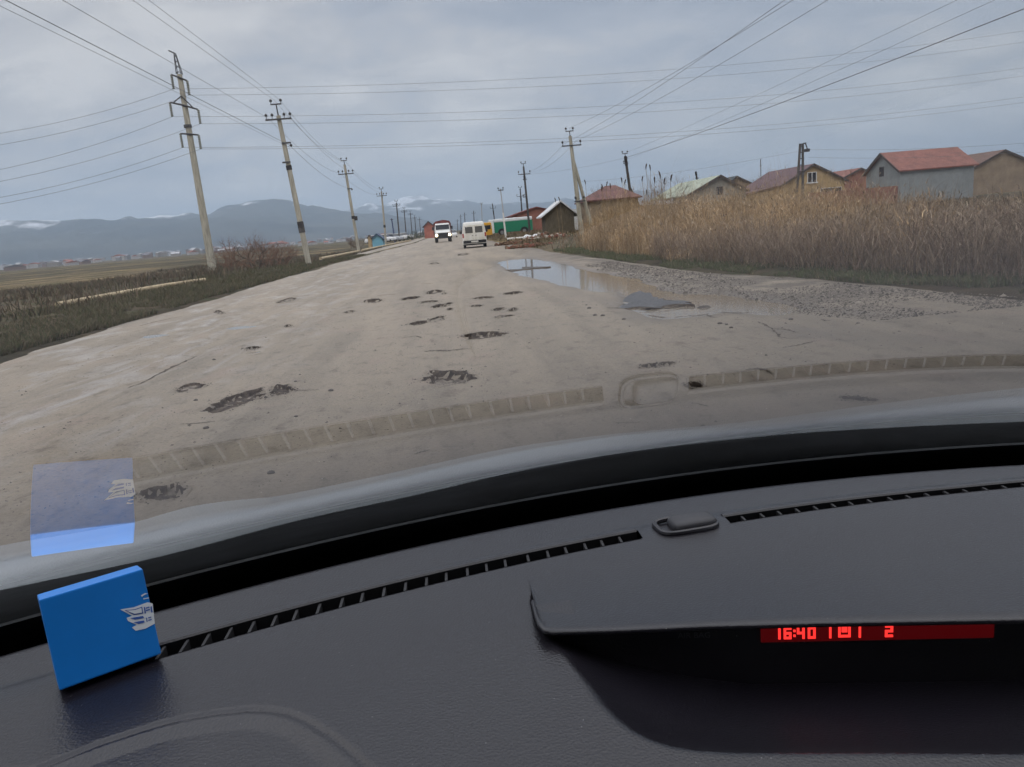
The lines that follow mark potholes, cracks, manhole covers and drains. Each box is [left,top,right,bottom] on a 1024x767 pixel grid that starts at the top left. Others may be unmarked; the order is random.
pothole [458,331,510,340]
pothole [418,369,469,382]
pothole [175,382,207,394]
pothole [198,386,268,415]
pothole [269,384,297,396]
